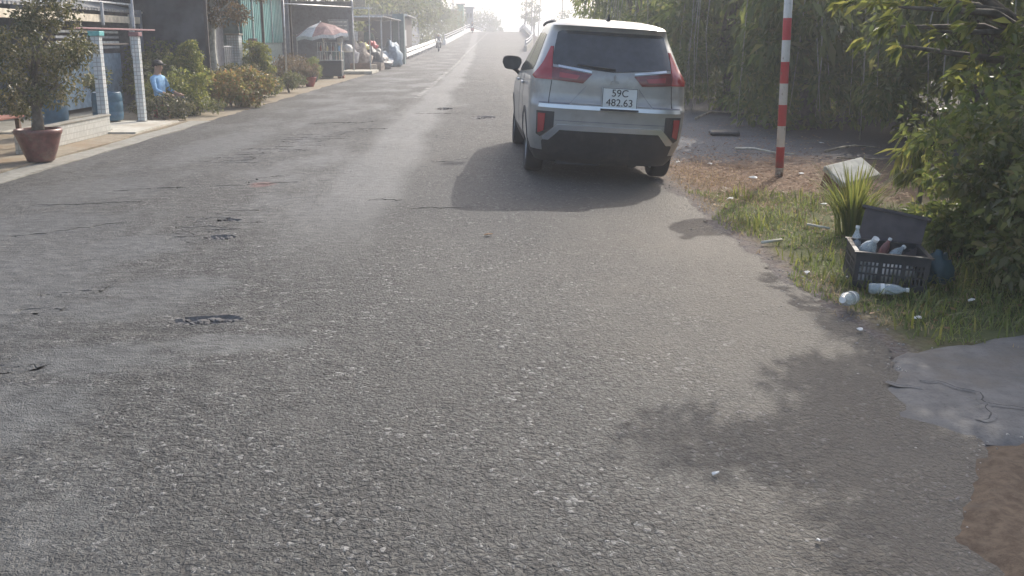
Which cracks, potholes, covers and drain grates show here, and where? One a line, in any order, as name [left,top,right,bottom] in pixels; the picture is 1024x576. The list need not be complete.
crack [15,186,179,238]
crack [19,284,110,315]
pothole [179,215,258,226]
crack [885,379,1024,422]
pothole [184,232,253,245]
crack [0,356,51,374]
pothole [144,309,267,333]
crack [369,197,471,210]
